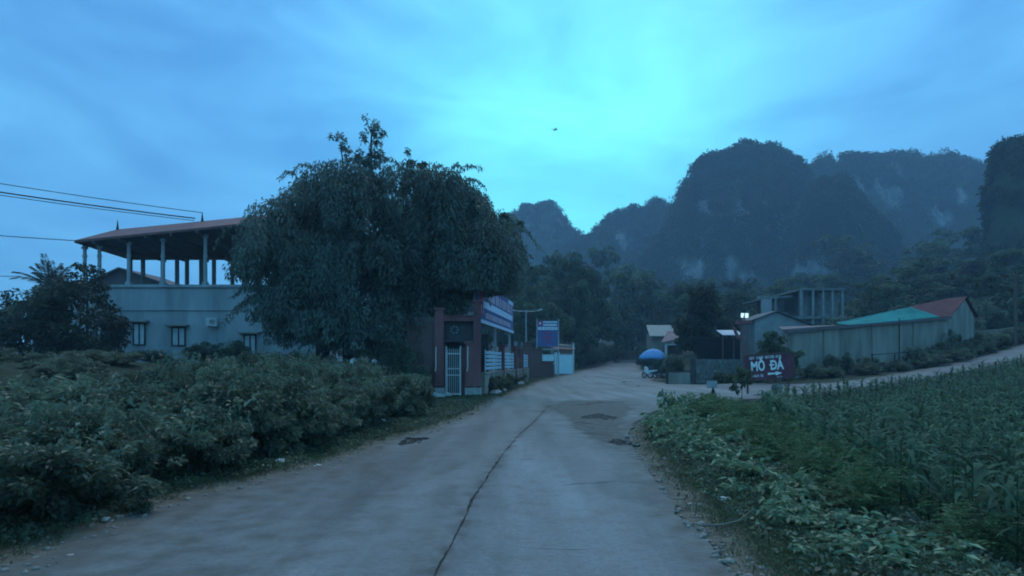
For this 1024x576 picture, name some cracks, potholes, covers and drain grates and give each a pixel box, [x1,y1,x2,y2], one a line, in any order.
pothole [608,439,640,447]
pothole [398,437,429,446]
